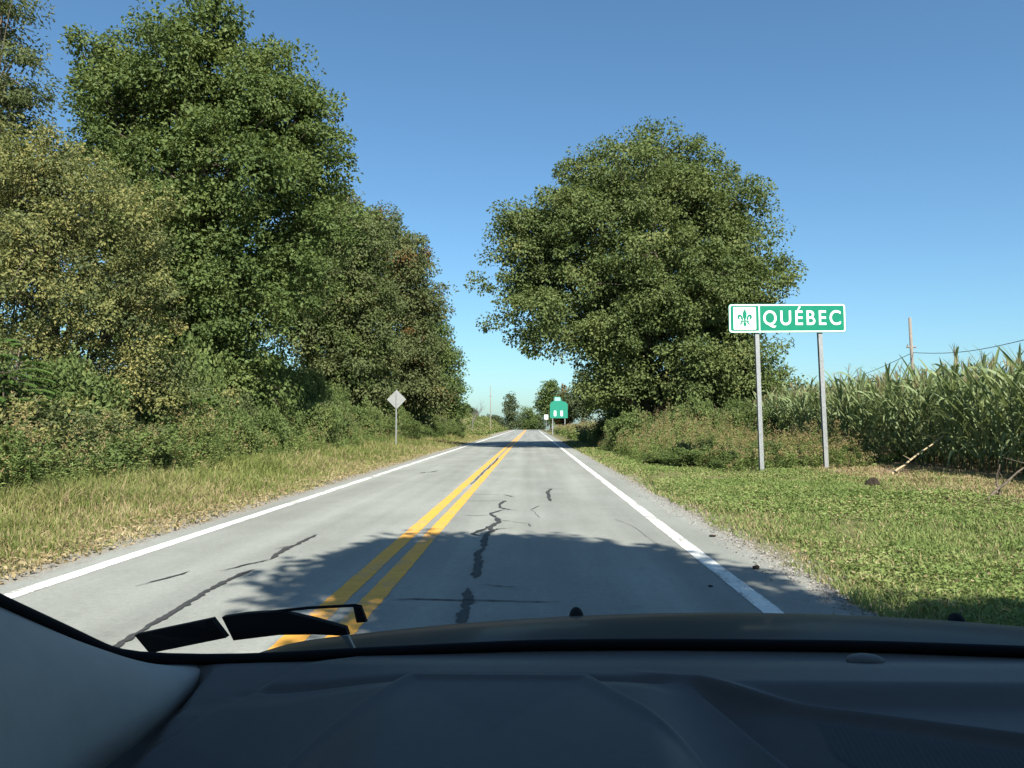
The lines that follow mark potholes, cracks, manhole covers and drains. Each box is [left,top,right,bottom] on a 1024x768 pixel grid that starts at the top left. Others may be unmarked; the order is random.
crack [389,488,557,623]
crack [226,534,317,570]
